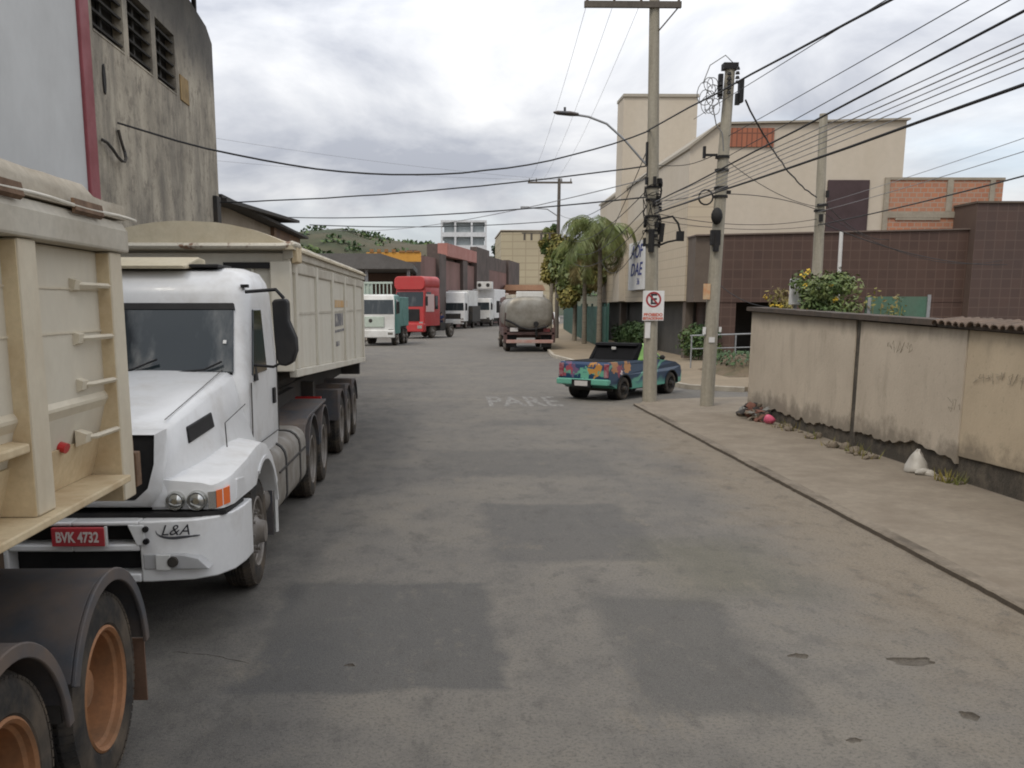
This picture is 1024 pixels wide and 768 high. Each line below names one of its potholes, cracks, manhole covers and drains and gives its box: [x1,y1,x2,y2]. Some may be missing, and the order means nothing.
pothole [959,711,980,721]
pothole [886,657,935,666]
